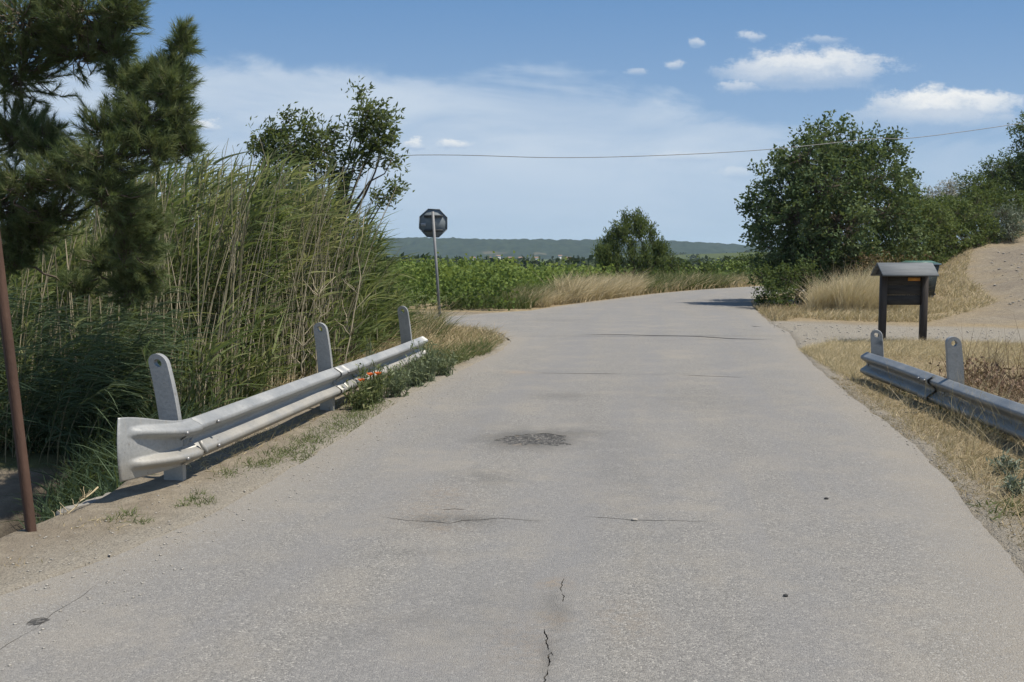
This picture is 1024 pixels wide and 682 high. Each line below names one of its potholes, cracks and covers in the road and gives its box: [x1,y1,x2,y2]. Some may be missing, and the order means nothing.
crack [544,579,565,682]
pothole [26,618,49,626]
